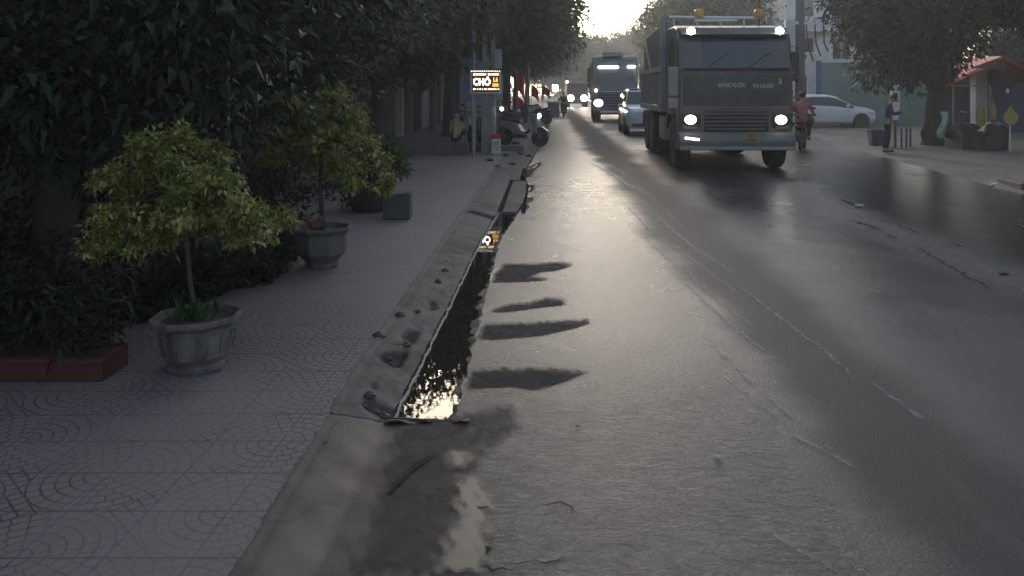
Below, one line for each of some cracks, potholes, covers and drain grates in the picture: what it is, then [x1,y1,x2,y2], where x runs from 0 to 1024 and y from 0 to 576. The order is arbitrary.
crack [544,501,640,551]
crack [386,453,439,494]
crack [842,199,991,289]
pothole [382,355,406,368]
